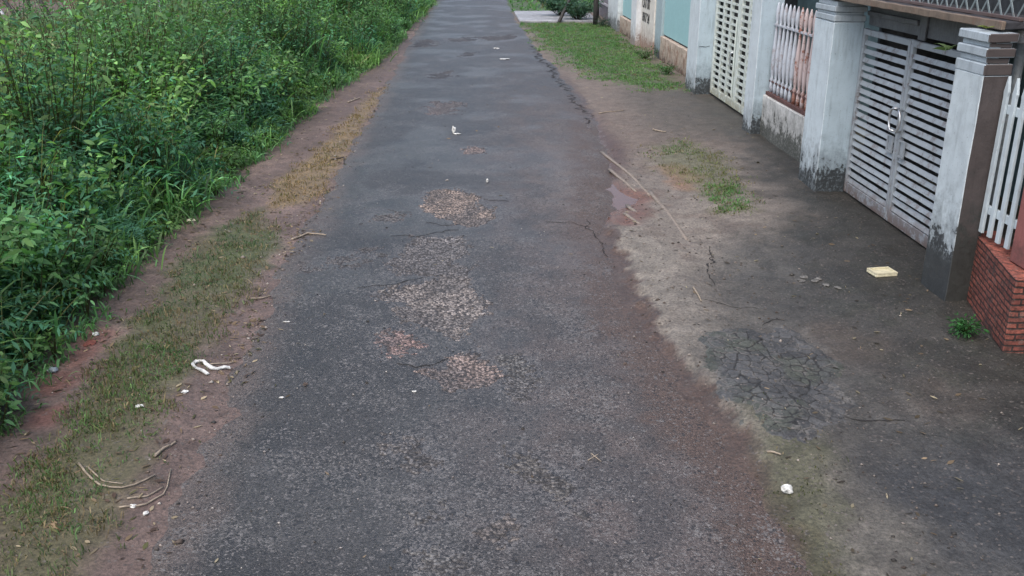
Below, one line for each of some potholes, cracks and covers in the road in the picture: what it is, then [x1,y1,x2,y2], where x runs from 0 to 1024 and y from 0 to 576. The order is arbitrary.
pothole [374,328,429,358]
crack [698,246,905,445]
pothole [418,188,497,227]
pothole [459,146,487,154]
pothole [413,345,504,393]
crack [530,46,594,124]
pothole [366,275,494,341]
